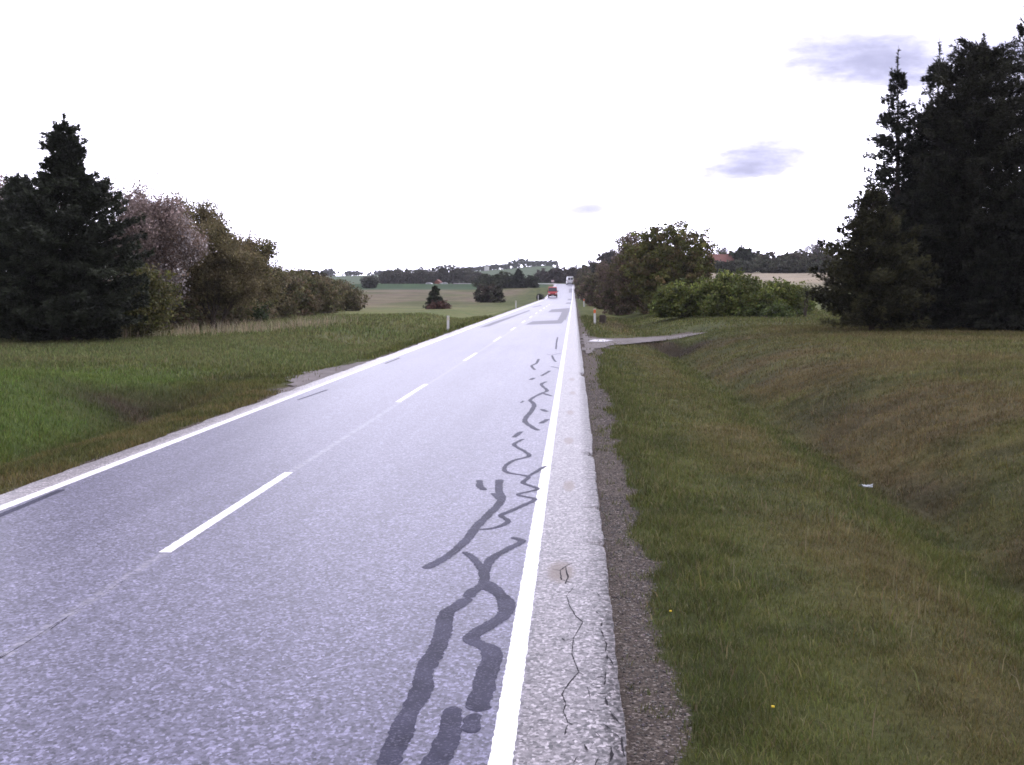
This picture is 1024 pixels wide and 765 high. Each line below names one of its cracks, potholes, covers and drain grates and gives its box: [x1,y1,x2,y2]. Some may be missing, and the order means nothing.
crack [554,563,625,765]
